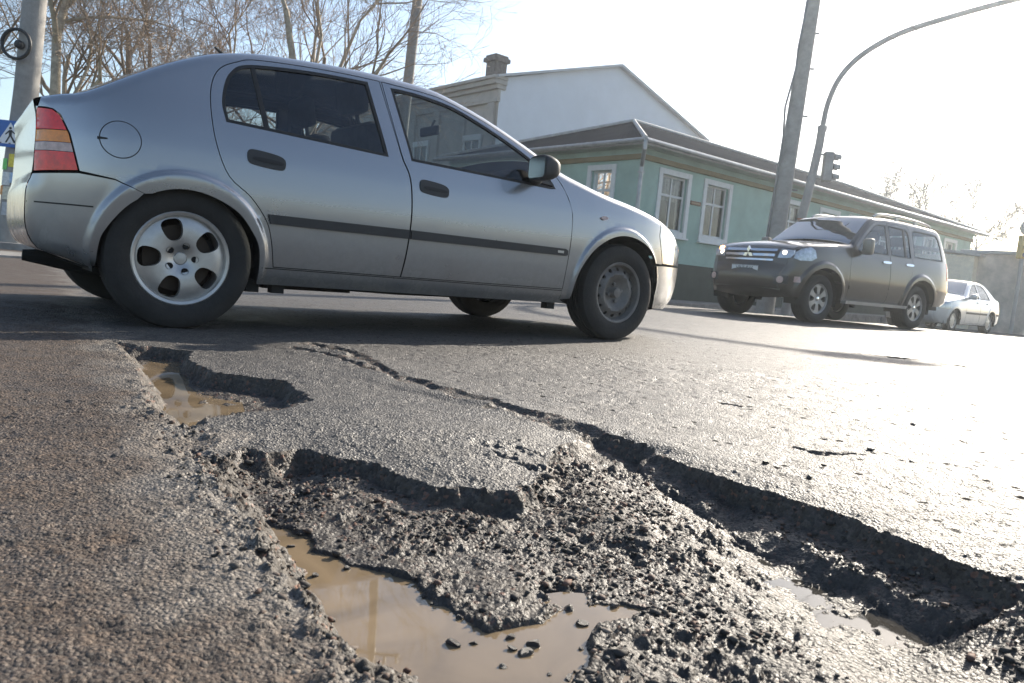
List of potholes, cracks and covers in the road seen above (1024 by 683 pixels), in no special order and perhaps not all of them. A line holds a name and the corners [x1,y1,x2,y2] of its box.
pothole [113,341,314,430]
pothole [188,433,1024,683]
crack [286,342,606,441]
crack [788,445,868,457]
